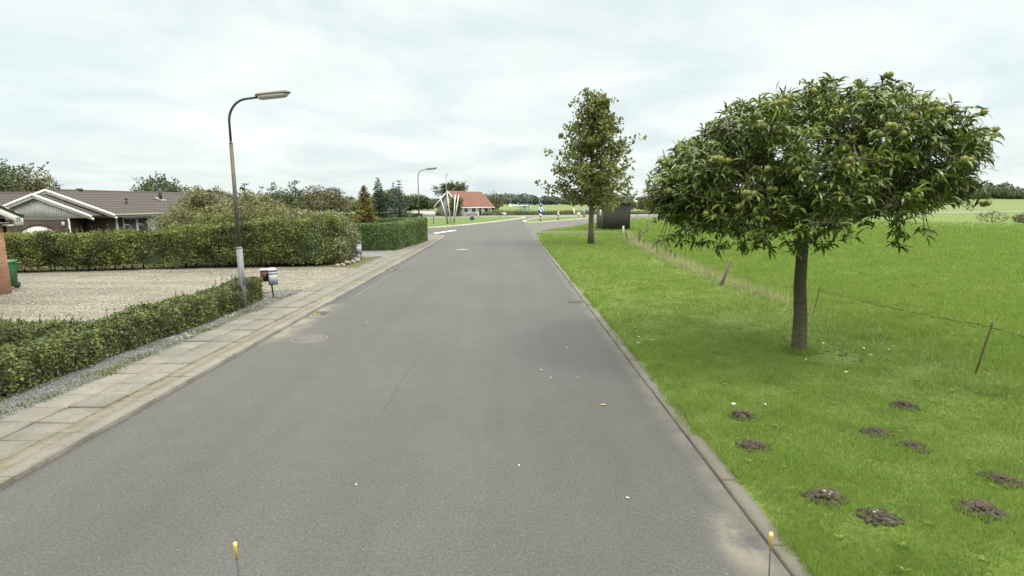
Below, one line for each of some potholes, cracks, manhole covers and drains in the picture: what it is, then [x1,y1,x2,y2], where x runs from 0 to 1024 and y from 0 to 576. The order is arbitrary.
manhole cover [290,334,328,344]
